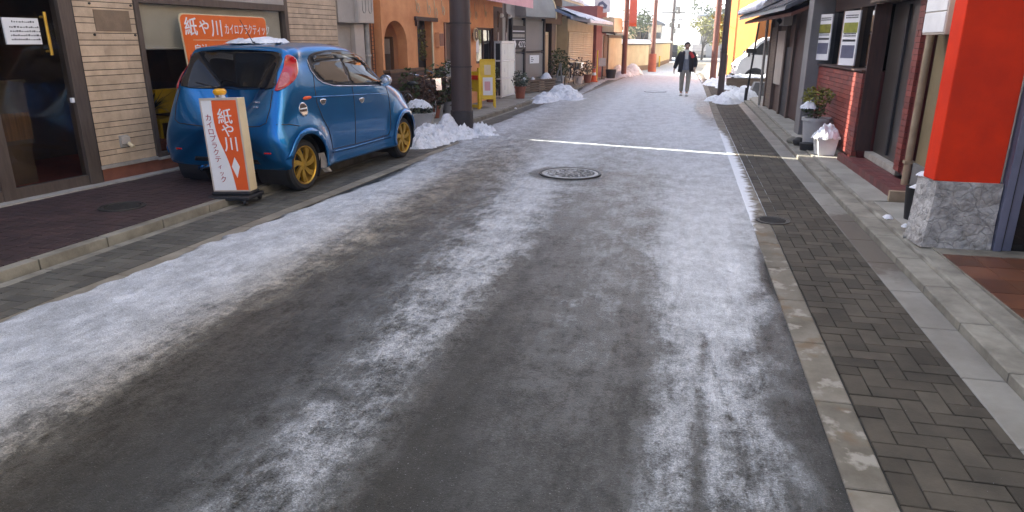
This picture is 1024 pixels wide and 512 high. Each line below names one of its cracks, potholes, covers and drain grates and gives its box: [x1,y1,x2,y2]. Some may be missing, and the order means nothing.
manhole cover [97,201,147,212]
manhole cover [539,167,601,180]
manhole cover [756,216,790,225]
